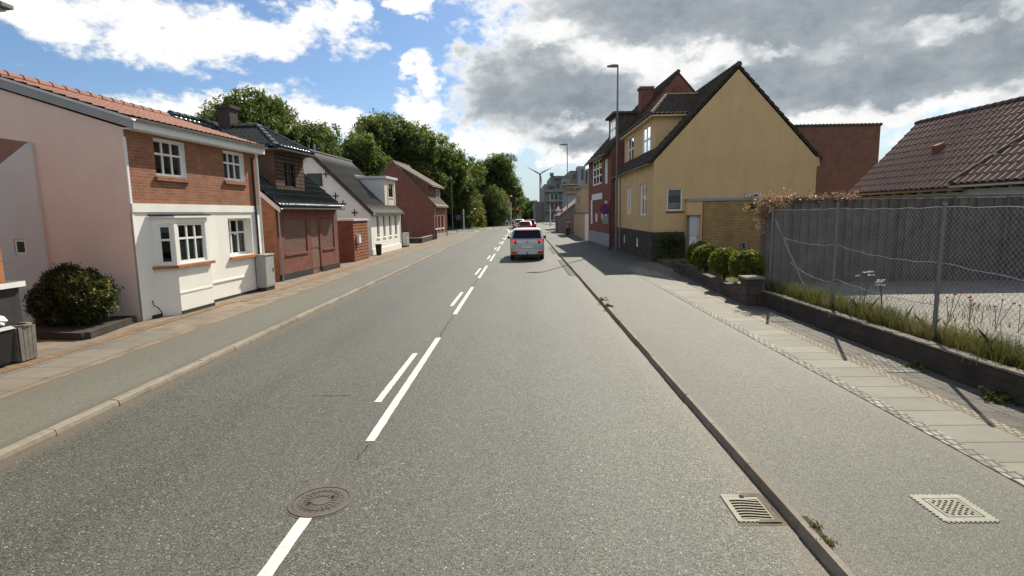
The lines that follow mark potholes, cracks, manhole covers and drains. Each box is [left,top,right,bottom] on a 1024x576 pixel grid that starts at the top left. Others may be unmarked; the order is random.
drain grate [720,493,791,526]
manhole cover [285,485,356,519]
